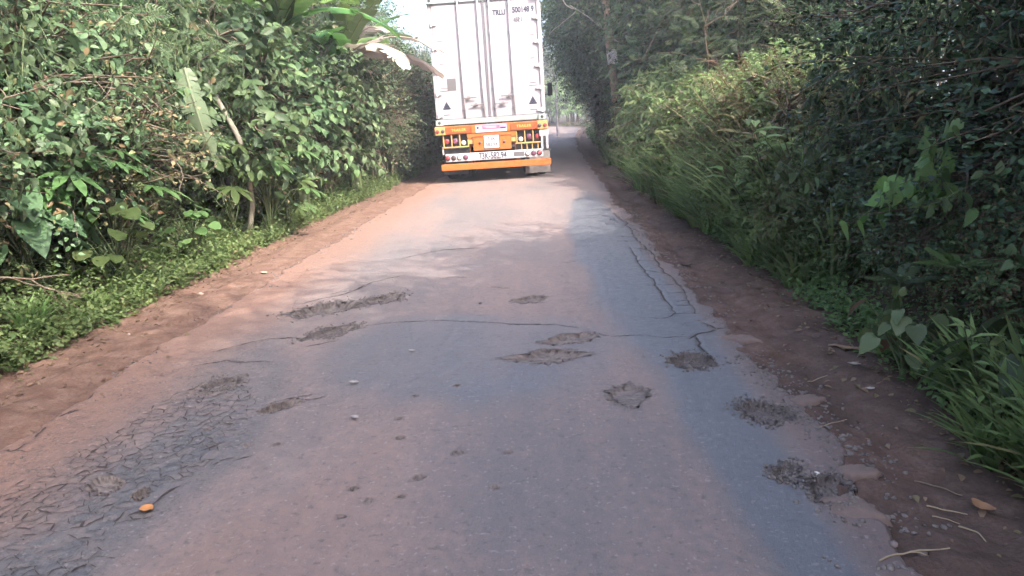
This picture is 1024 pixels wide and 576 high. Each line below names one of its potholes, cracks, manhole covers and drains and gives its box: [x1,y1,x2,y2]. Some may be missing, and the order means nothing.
pothole [603,381,655,411]
pothole [291,321,368,344]
pothole [251,398,308,416]
pothole [495,347,601,366]
pothole [659,348,725,374]
pothole [798,469,860,510]
pothole [359,289,413,307]
pothole [534,331,601,347]
crack [0,381,256,576]
pothole [266,296,374,323]
crack [600,216,722,361]
pothole [762,456,815,489]
